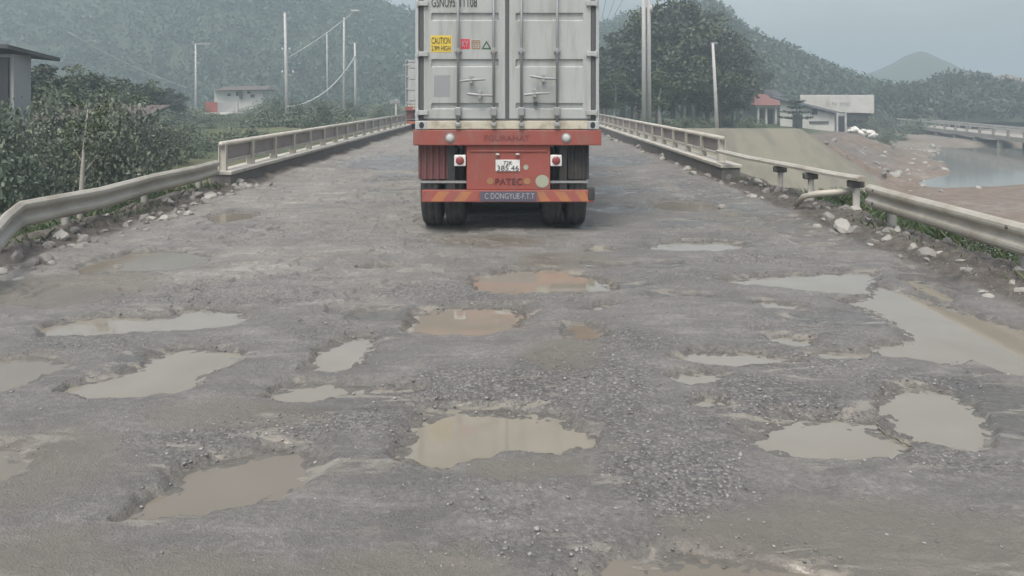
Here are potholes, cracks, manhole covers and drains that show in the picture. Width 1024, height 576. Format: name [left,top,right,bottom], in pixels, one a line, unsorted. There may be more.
pothole [864,377,1007,452]
pothole [0,348,87,393]
pothole [293,329,386,372]
pothole [828,280,1024,377]
pothole [31,300,260,337]
pothole [711,267,888,296]
pothole [556,315,615,340]
pothole [51,339,255,399]
pothole [662,343,813,367]
pothole [637,237,759,252]
pothole [890,274,963,305]
pothole [0,435,47,482]
